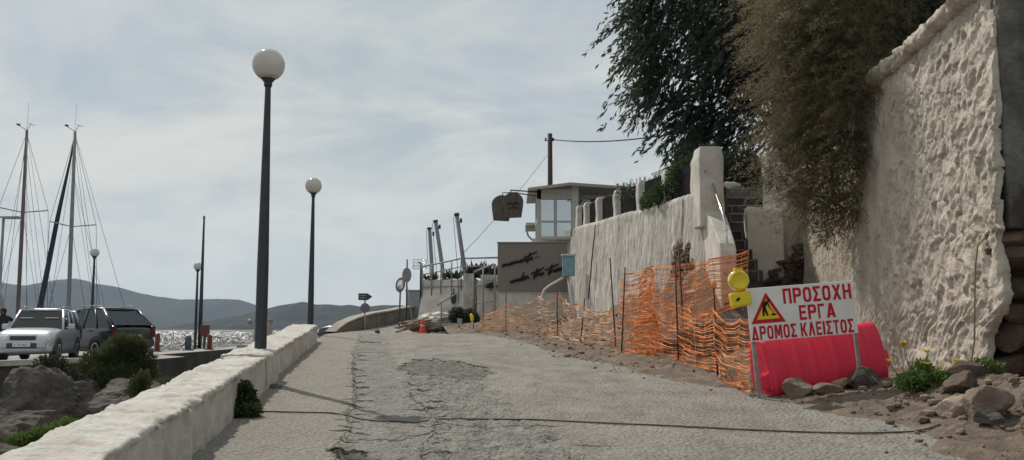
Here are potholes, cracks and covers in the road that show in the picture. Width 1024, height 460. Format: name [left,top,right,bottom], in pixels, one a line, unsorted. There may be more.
crack [324,349,559,460]
